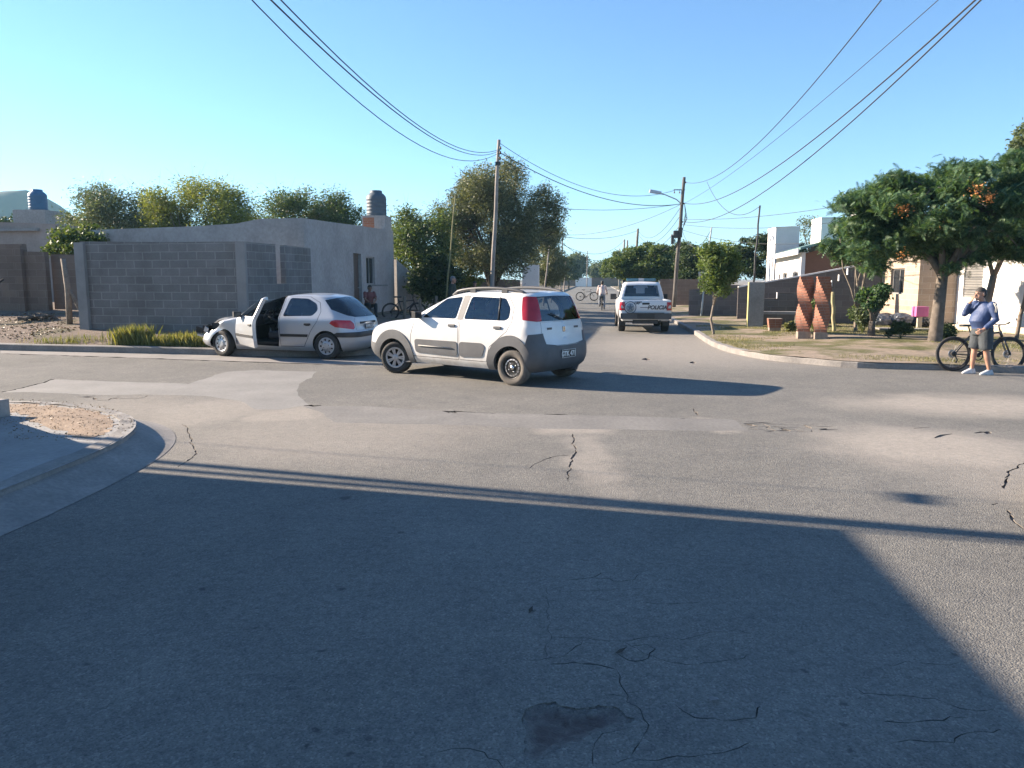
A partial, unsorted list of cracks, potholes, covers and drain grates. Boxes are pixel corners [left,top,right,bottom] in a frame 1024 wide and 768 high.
crack [528,434,577,479]
crack [178,424,197,467]
crack [992,478,1024,529]
crack [856,688,1001,743]
crack [538,629,753,764]
